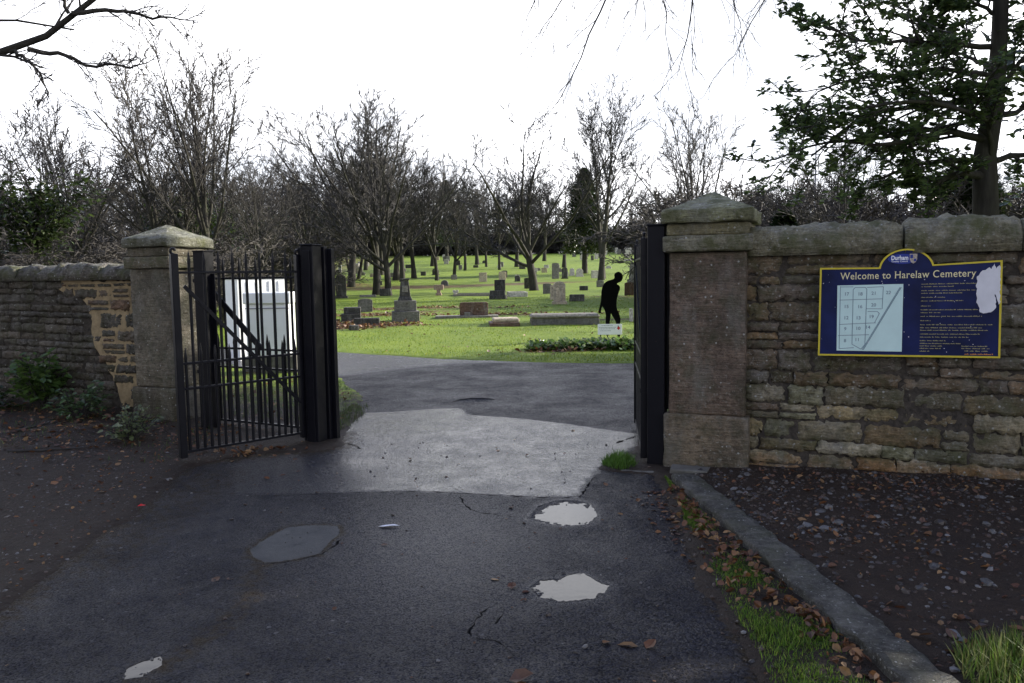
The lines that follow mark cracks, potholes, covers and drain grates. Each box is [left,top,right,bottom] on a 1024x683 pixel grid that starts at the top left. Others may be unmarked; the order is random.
pothole [527,500,598,526]
crack [467,605,516,656]
crack [249,477,595,517]
pothole [530,573,610,603]
